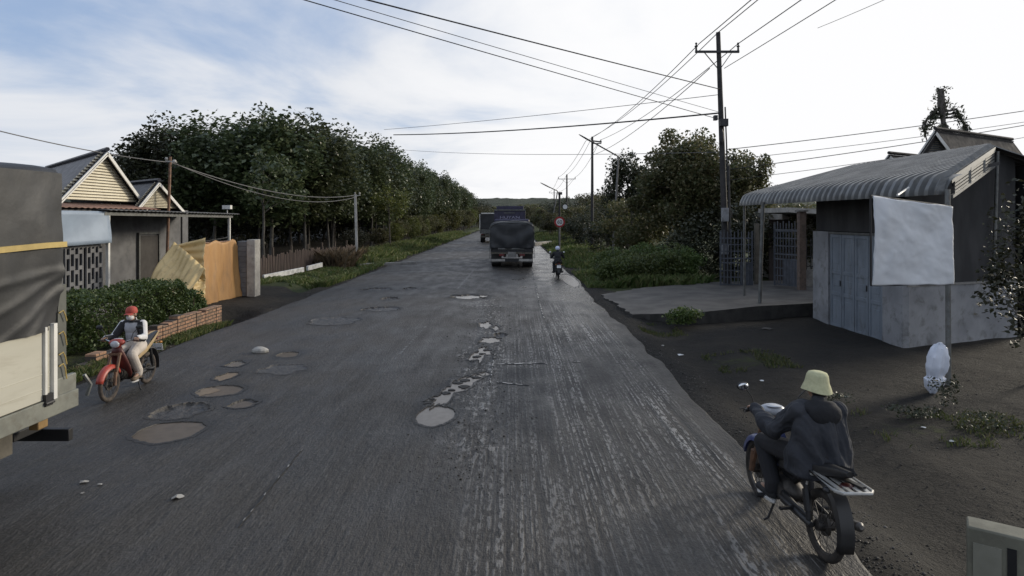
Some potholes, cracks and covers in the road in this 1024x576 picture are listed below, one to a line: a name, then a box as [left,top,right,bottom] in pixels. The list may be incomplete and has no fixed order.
pothole [191,384,248,398]
pothole [252,363,312,375]
pothole [223,397,263,409]
pothole [477,336,505,344]
pothole [307,316,363,326]
crack [488,353,581,391]
pothole [221,359,249,367]
pothole [210,371,242,382]
pothole [466,343,495,364]
pothole [126,419,212,445]
pothole [421,371,486,410]
pothole [411,404,459,428]
